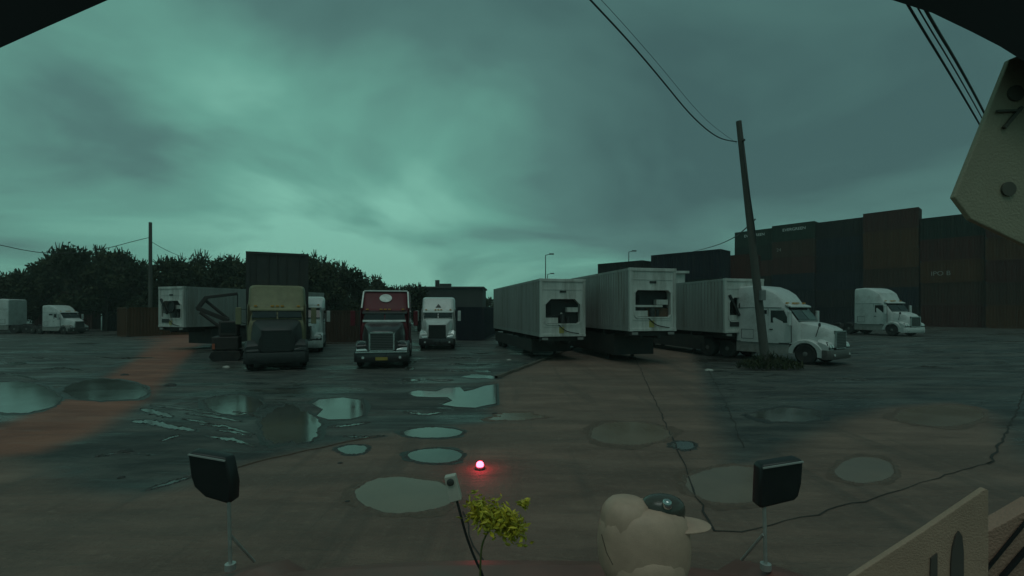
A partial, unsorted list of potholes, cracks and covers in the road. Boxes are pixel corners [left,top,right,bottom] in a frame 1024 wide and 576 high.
pothole [197,393,268,417]
pothole [399,447,468,465]
pothole [0,381,65,415]
pothole [742,406,833,423]
pothole [307,397,371,423]
pothole [403,383,500,409]
pothole [666,440,701,452]
crack [635,359,1024,532]
pothole [339,473,463,518]
pothole [332,444,372,456]
pothole [255,403,329,449]
pothole [394,426,468,440]
